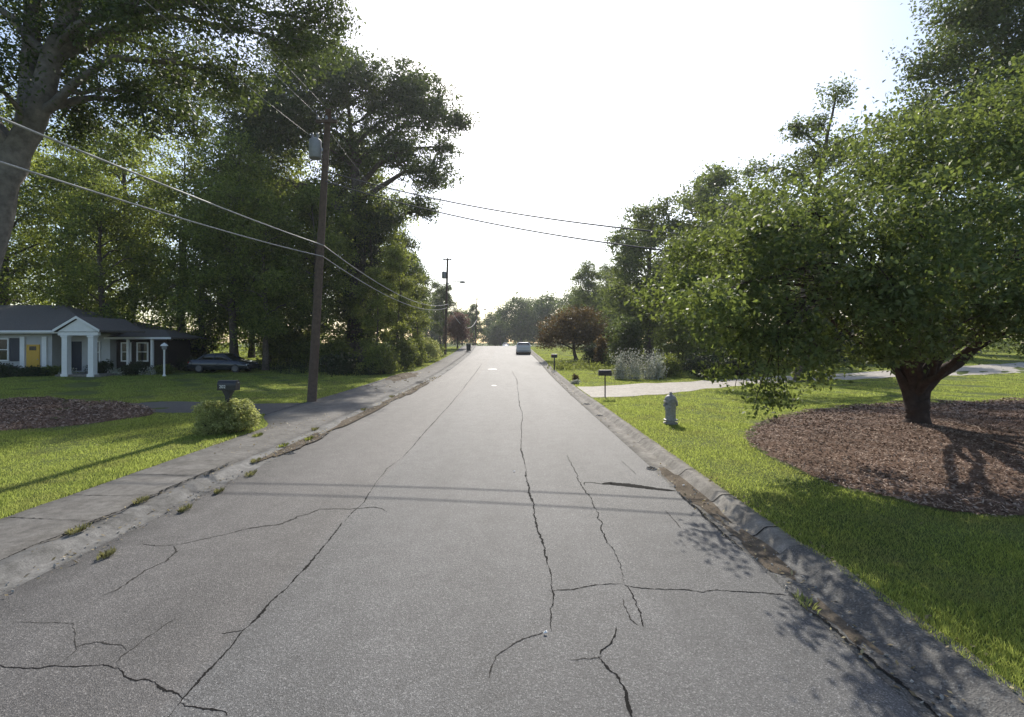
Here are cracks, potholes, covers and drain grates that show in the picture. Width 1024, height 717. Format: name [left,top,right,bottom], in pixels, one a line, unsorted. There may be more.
crack [0,365,481,717]
crack [489,387,784,716]
